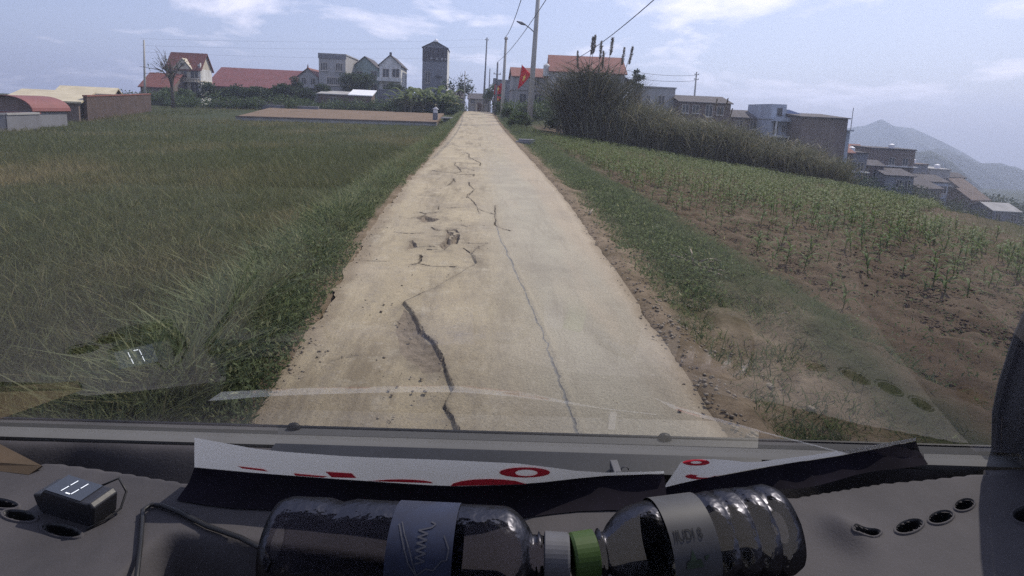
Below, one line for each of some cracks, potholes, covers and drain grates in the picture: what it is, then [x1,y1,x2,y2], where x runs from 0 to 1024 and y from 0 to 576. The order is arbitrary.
crack [396,143,488,419]
pothole [439,229,460,251]
